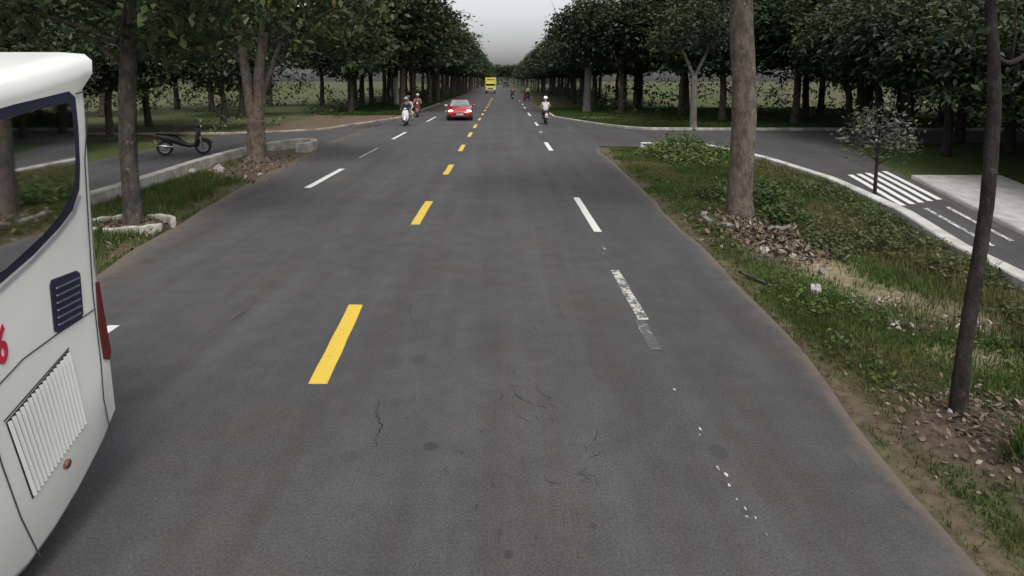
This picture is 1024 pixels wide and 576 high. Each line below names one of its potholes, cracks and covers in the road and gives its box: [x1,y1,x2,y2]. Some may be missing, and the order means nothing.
crack [500,371,556,423]
crack [544,431,599,485]
